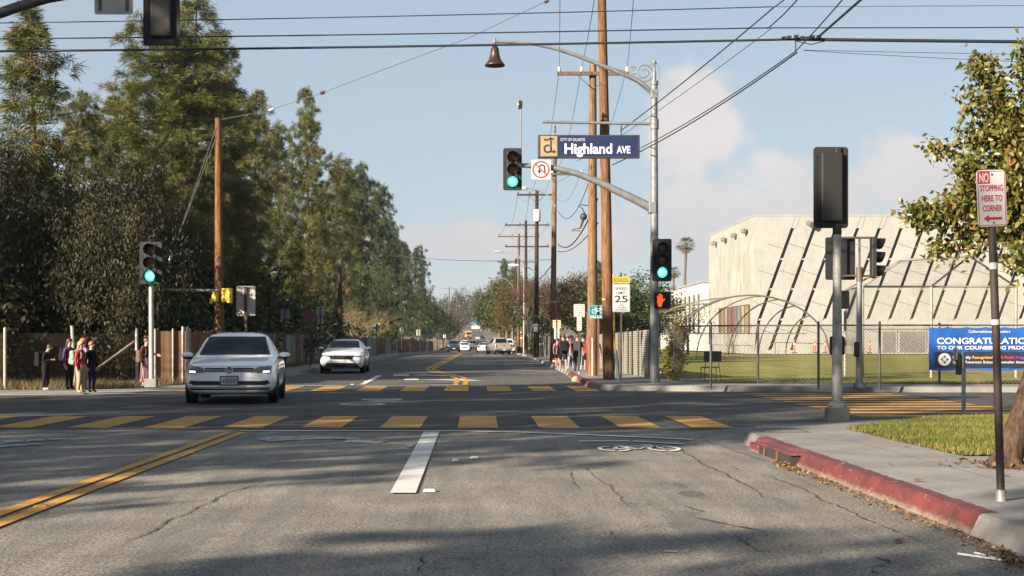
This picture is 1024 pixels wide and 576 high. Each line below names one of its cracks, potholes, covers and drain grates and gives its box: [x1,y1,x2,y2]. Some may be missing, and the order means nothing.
crack [113,483,259,551]
crack [569,463,778,552]
drain grate [749,442,803,466]
crack [672,444,932,549]
